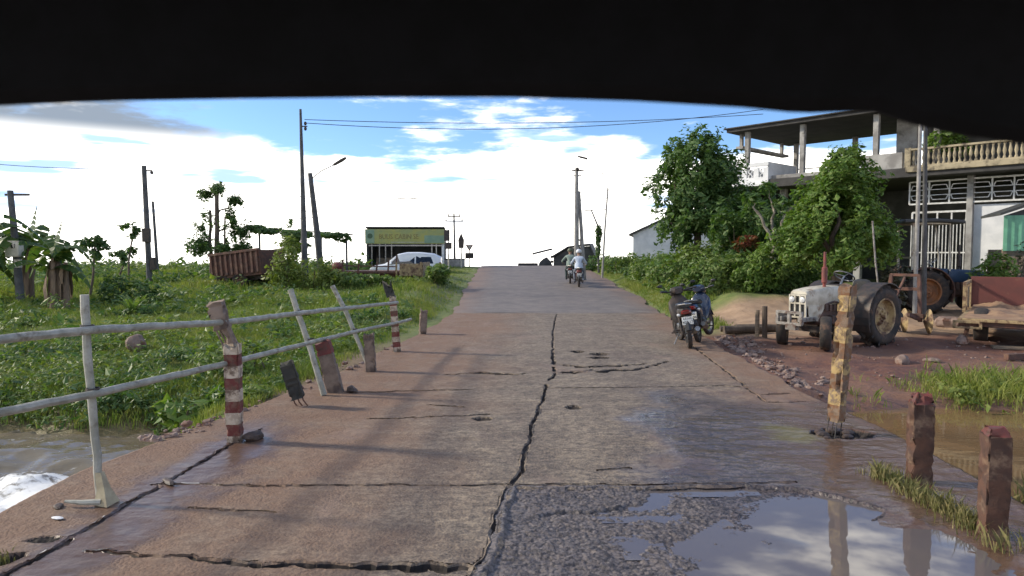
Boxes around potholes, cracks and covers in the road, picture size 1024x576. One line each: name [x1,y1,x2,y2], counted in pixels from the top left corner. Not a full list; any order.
pothole [15,534,74,545]
crack [83,314,668,576]
